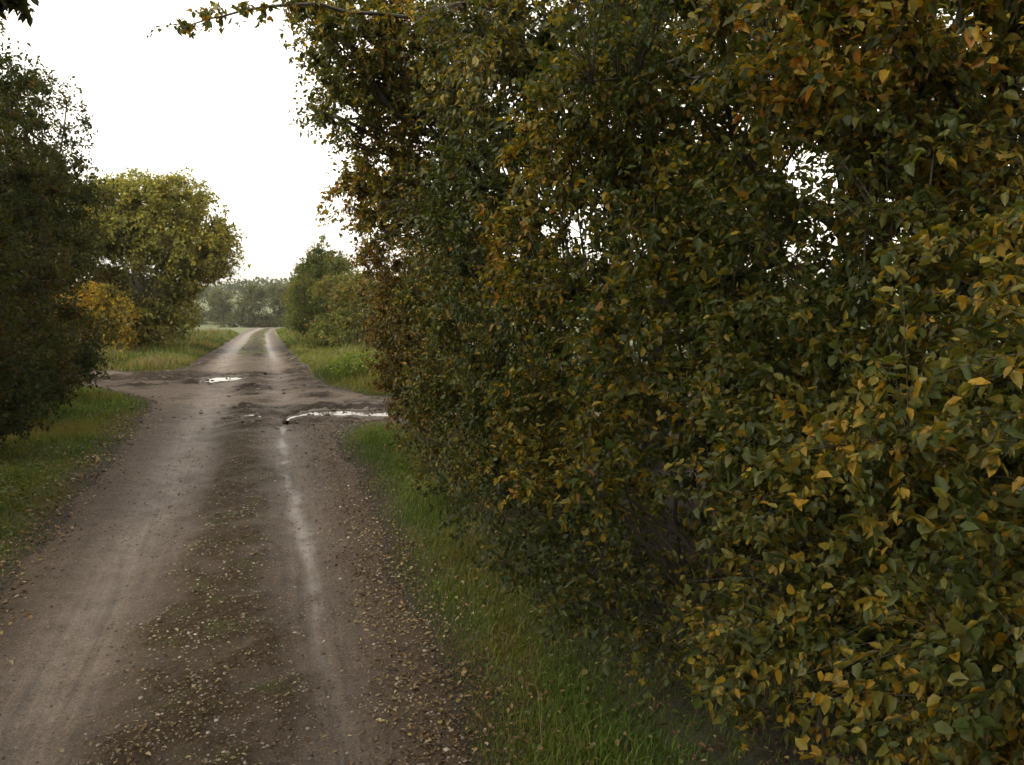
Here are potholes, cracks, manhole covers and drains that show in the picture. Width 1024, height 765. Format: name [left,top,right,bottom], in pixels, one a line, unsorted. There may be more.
pothole [285,406,452,425]
pothole [198,375,247,384]
